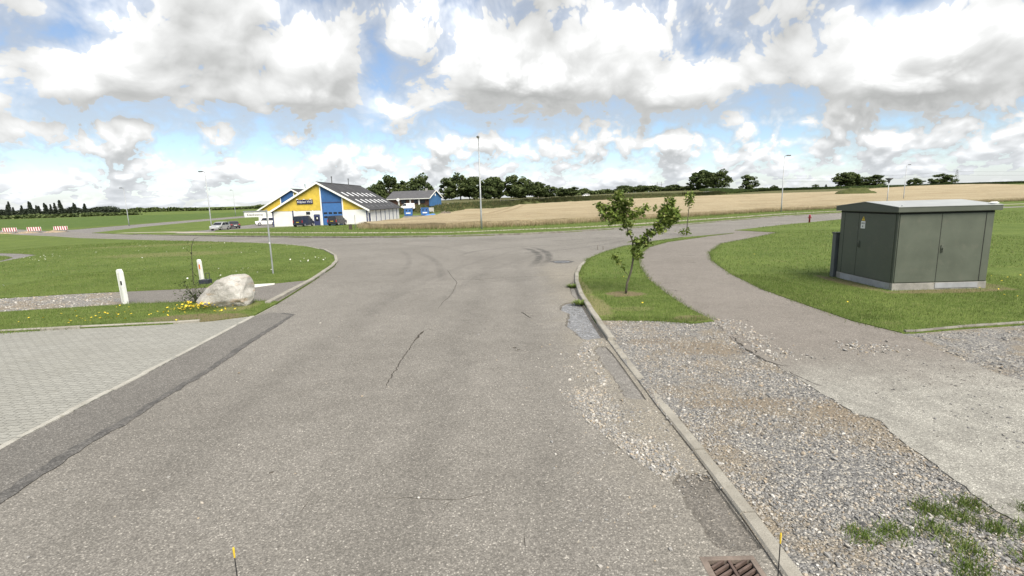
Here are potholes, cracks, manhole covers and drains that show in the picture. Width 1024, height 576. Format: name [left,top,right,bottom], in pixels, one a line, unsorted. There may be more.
crack [390,491,491,512]
drain grate [699,555,766,576]
crack [386,329,431,386]
pothole [559,302,604,340]
